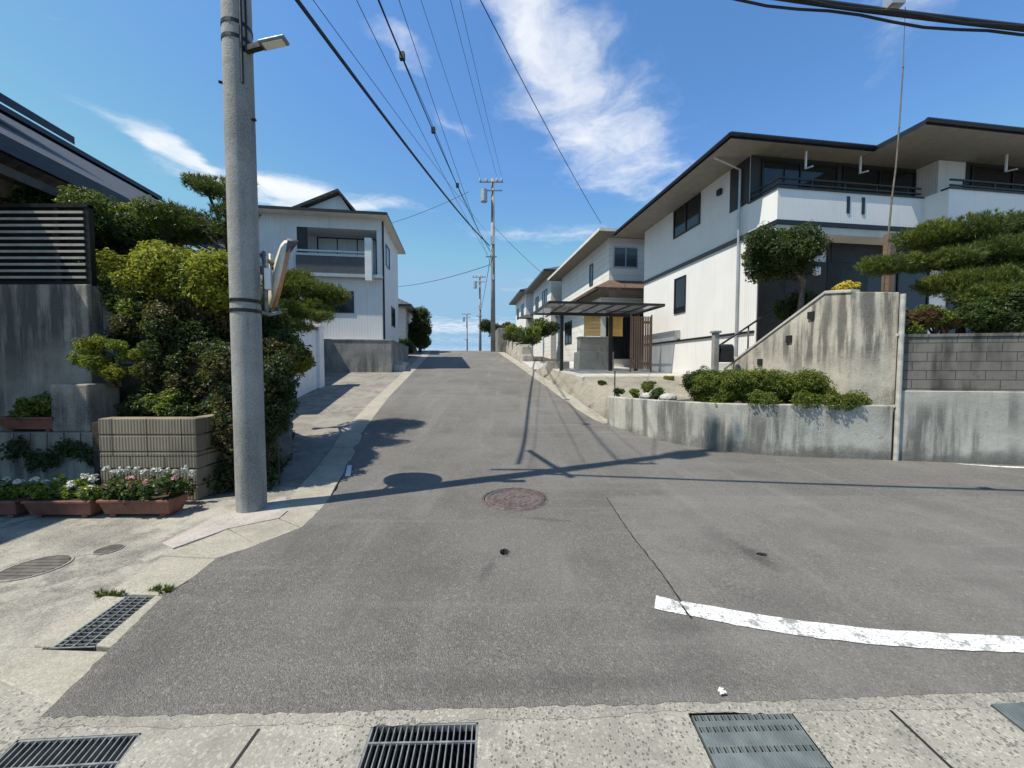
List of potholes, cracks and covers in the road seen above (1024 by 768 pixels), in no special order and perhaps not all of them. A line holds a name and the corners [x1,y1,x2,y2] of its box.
utility cover [0,554,75,582]
drain grate [358,722,478,768]
utility cover [92,544,125,555]
drain grate [0,733,142,768]
manhole cover [481,487,549,511]
drain grate [46,596,153,651]
